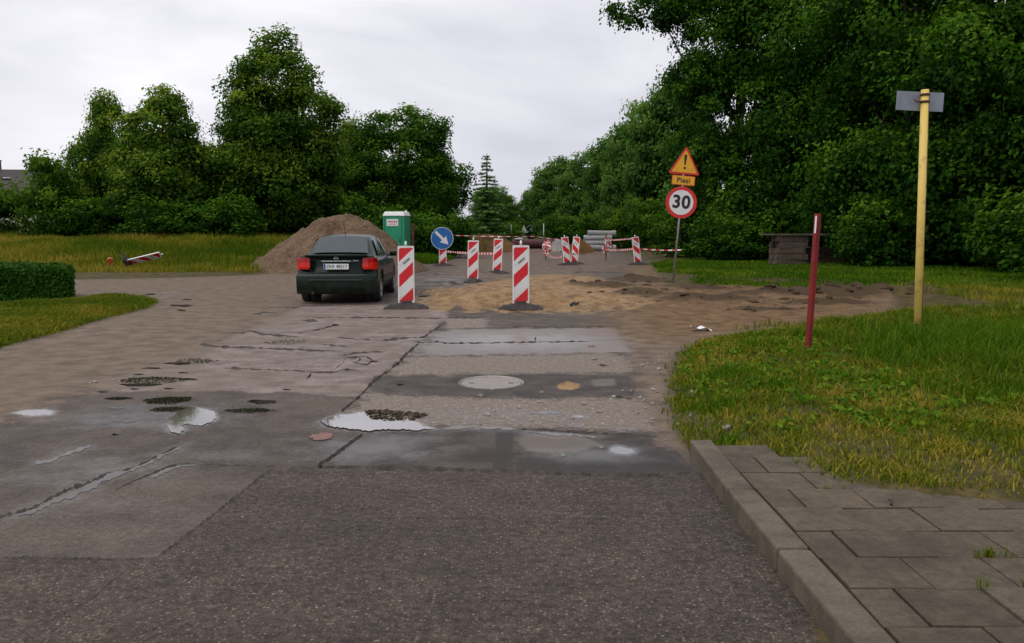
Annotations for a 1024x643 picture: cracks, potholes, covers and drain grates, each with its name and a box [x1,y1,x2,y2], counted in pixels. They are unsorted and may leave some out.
crack [200,307,443,379]
manhole cover [458,376,524,389]
crack [0,443,275,519]
